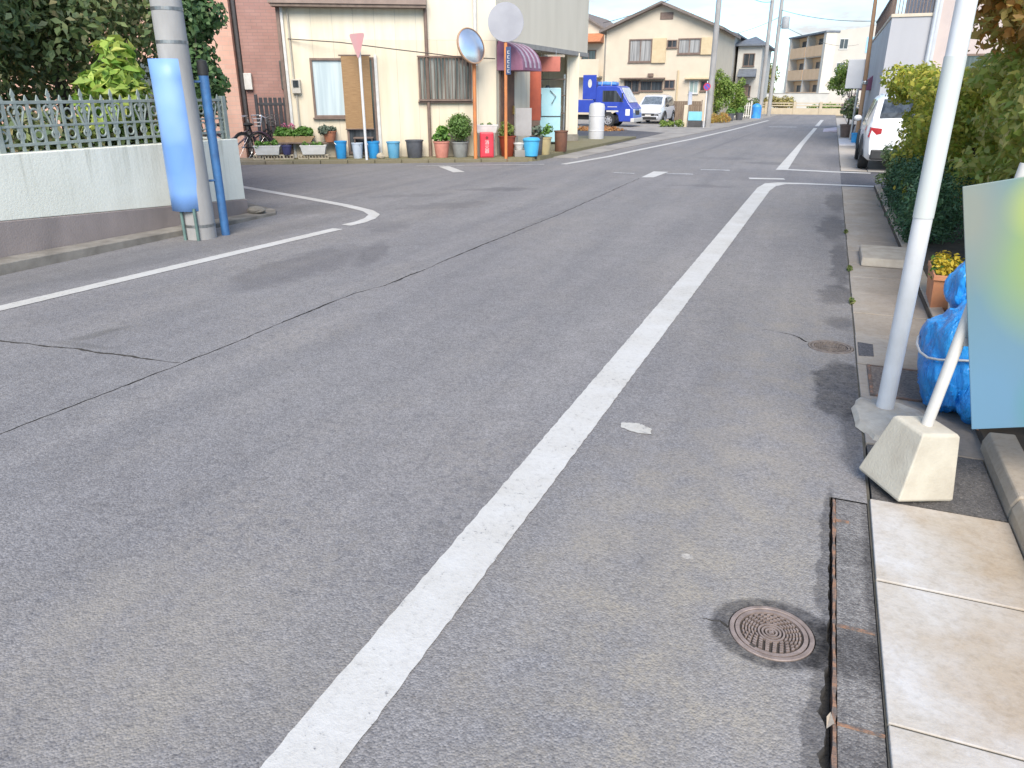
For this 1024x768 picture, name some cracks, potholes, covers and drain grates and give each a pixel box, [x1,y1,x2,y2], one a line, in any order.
crack [0,178,639,434]
manhole cover [729,606,815,662]
manhole cover [808,340,854,354]
utility cover [867,364,923,403]
